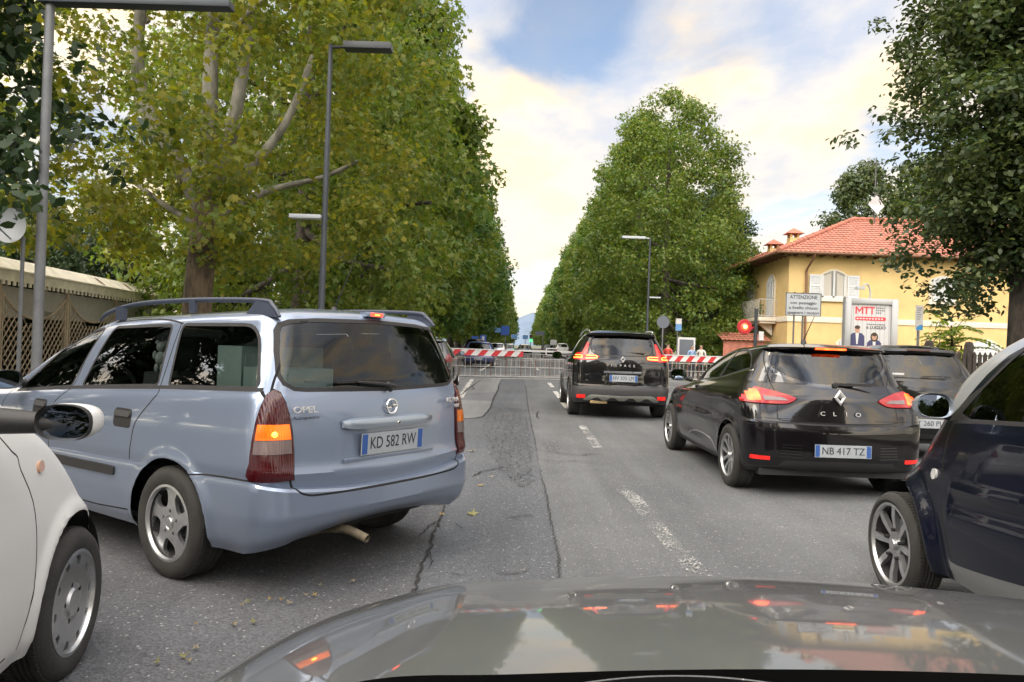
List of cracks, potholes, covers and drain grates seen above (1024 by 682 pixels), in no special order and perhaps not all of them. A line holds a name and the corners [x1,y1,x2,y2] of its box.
crack [460,380,604,578]
crack [410,505,462,593]
